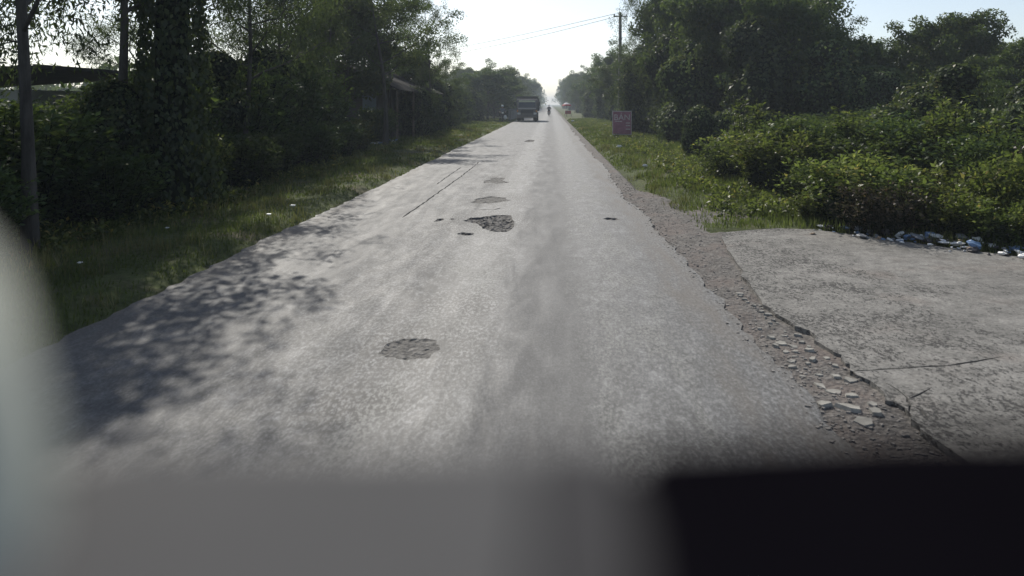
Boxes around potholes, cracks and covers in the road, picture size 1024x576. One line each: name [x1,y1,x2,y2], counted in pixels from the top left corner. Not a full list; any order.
pothole [377,338,440,360]
pothole [464,215,514,232]
crack [851,356,1003,419]
pothole [471,196,510,204]
